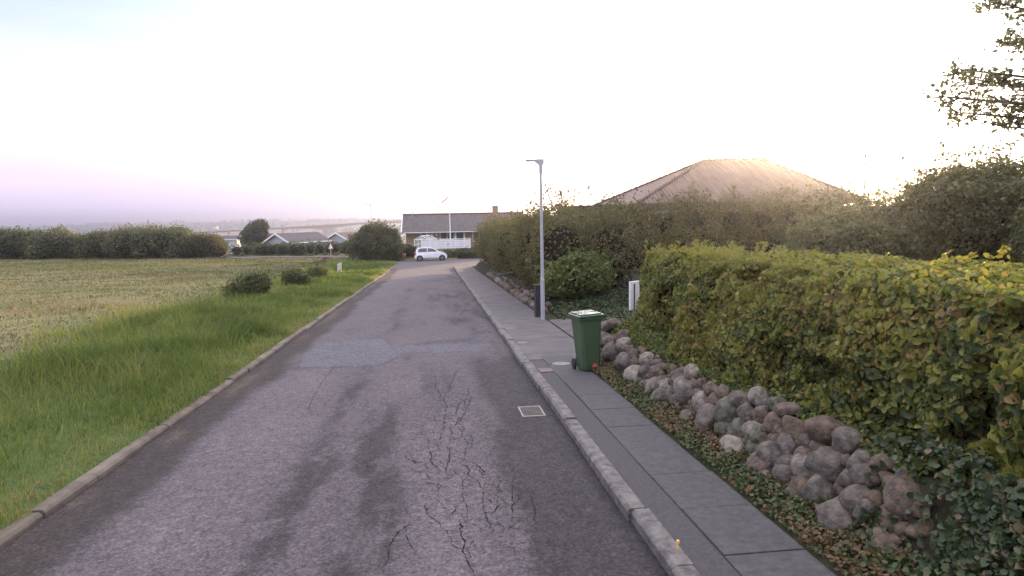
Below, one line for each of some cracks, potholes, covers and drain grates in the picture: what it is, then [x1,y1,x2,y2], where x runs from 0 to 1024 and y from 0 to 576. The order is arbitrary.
drain grate [518,405,546,417]
crack [357,372,550,573]
